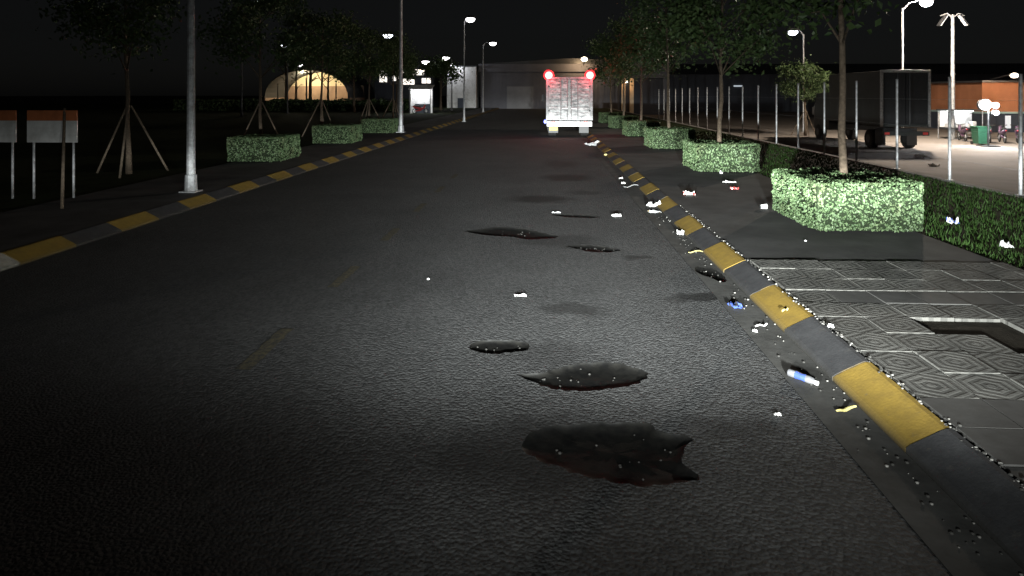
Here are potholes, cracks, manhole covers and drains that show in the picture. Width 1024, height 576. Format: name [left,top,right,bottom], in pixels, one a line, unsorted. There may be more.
pothole [465,227,558,239]
pothole [695,266,727,282]
pothole [468,340,530,354]
pothole [518,362,648,391]
pothole [566,245,621,253]
pothole [522,421,699,488]
